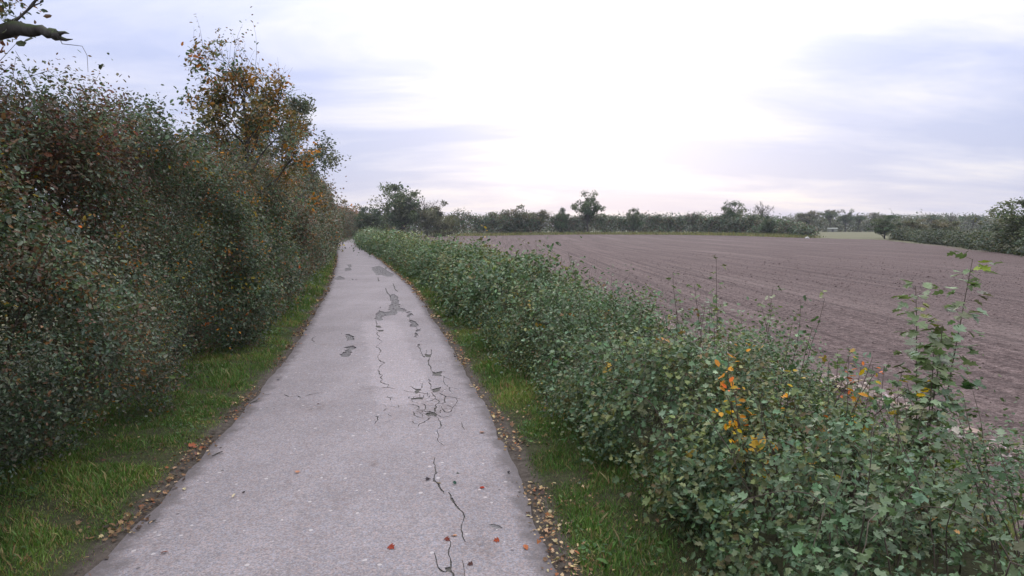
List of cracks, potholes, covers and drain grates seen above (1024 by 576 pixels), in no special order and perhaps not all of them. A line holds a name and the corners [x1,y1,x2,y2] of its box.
crack [375,319,465,576]
pothole [372,266,394,277]
